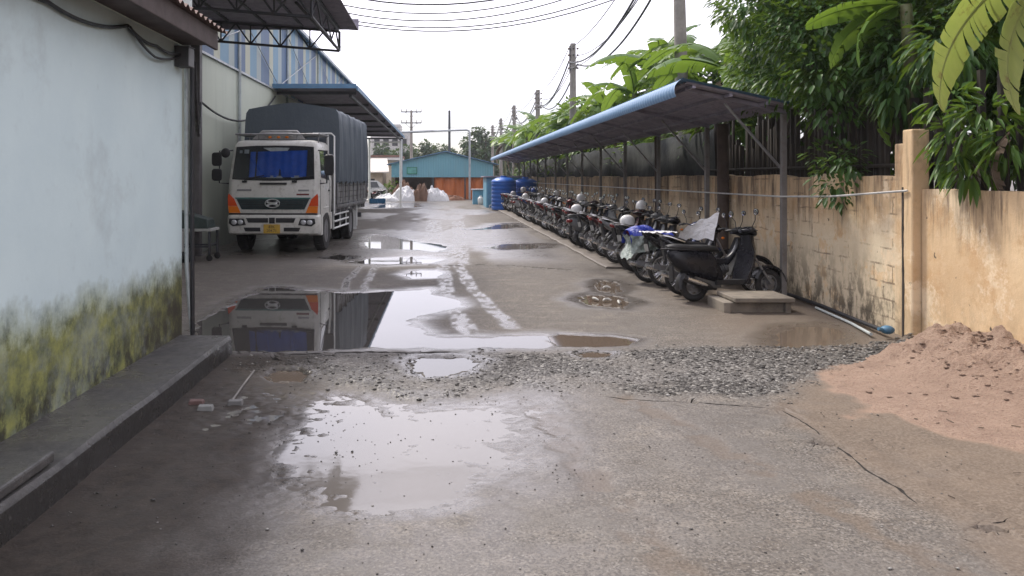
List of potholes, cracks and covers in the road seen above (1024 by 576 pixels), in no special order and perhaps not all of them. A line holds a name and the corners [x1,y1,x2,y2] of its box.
crack [956,504,1021,545]
crack [581,391,935,518]
